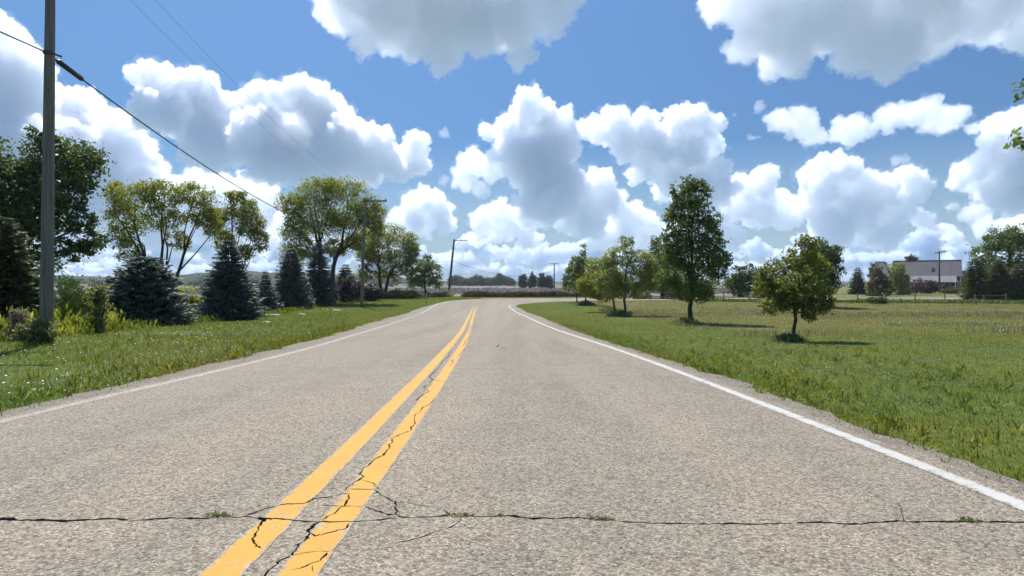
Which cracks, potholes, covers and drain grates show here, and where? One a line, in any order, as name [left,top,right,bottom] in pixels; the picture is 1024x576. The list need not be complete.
crack [0,318,1024,576]
